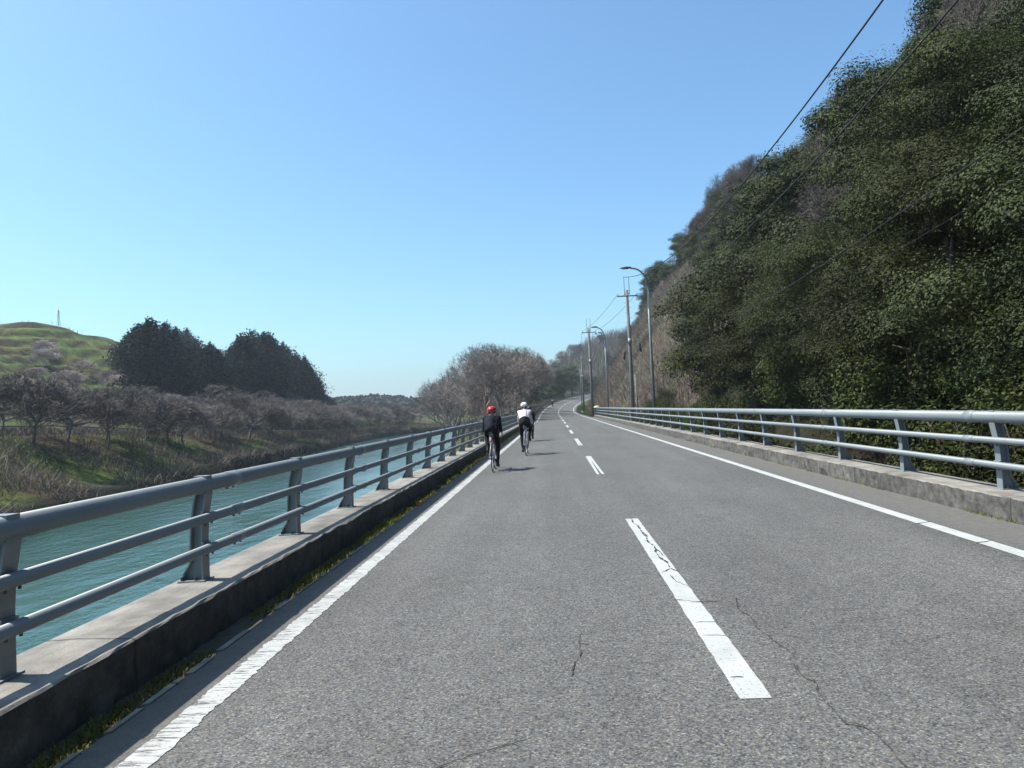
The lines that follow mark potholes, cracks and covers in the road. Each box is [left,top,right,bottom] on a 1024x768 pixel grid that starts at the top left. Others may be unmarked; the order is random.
crack [632,520,707,602]
crack [436,739,525,768]
crack [736,598,909,768]
